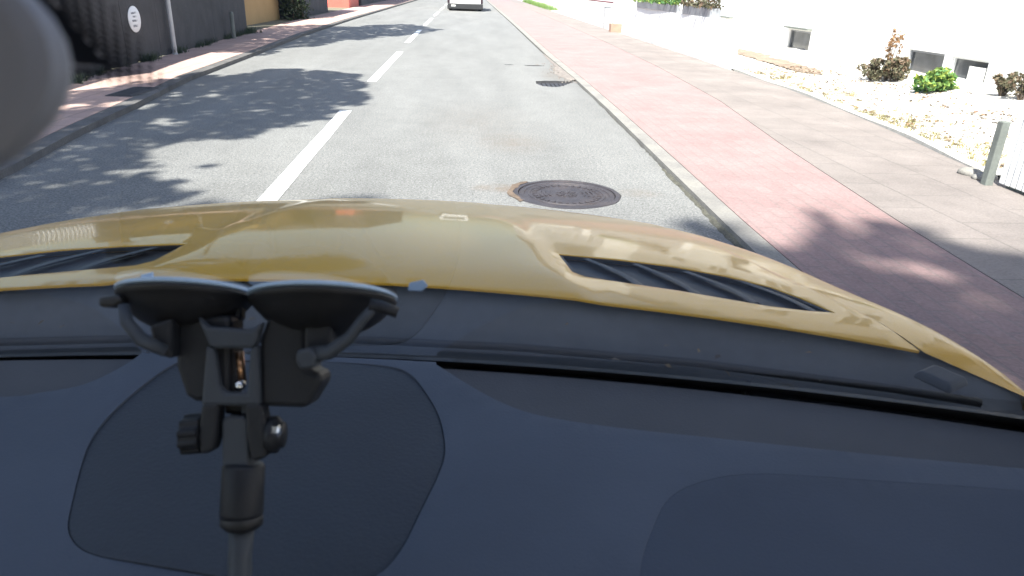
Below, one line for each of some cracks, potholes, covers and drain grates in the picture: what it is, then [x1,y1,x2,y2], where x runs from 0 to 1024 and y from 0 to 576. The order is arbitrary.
manhole cover [507,180,621,209]
